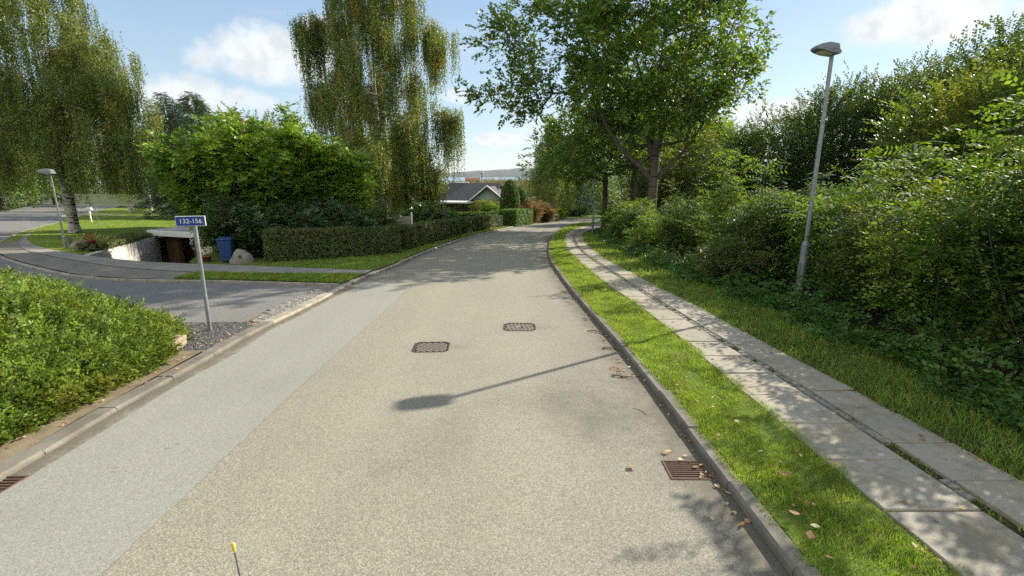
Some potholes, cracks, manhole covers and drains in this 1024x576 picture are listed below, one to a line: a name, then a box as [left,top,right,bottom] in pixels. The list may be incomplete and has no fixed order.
drain grate [0,475,30,493]
drain grate [661,460,713,480]
manhole cover [503,323,536,331]
manhole cover [412,342,450,353]
